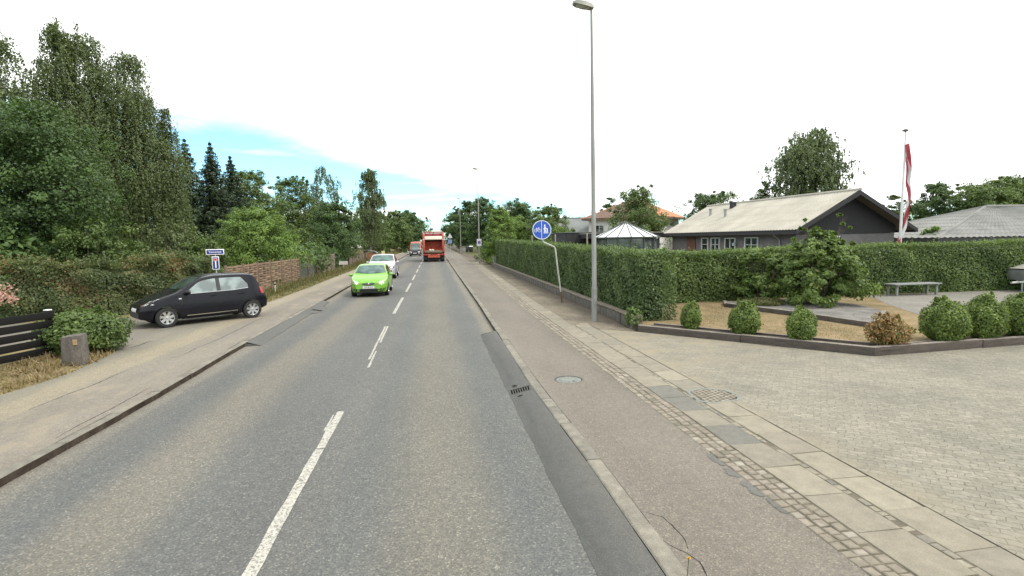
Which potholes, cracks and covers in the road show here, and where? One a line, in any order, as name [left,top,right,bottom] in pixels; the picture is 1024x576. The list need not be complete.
drain grate [509,385,532,395]
crack [641,512,707,576]
manhole cover [686,387,742,404]
